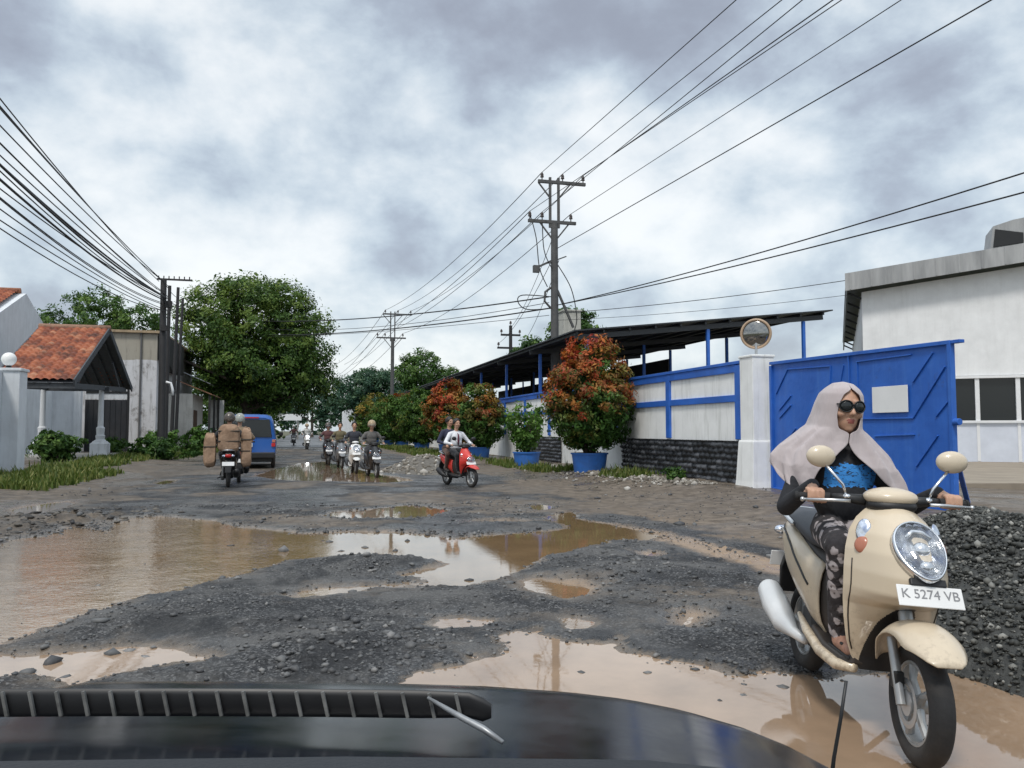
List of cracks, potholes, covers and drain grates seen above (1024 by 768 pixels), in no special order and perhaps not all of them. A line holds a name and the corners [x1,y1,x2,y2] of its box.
pothole [248,461,416,483]
pothole [383,623,1024,768]
pothole [0,509,679,645]
pothole [0,635,245,689]
pothole [314,504,455,519]
